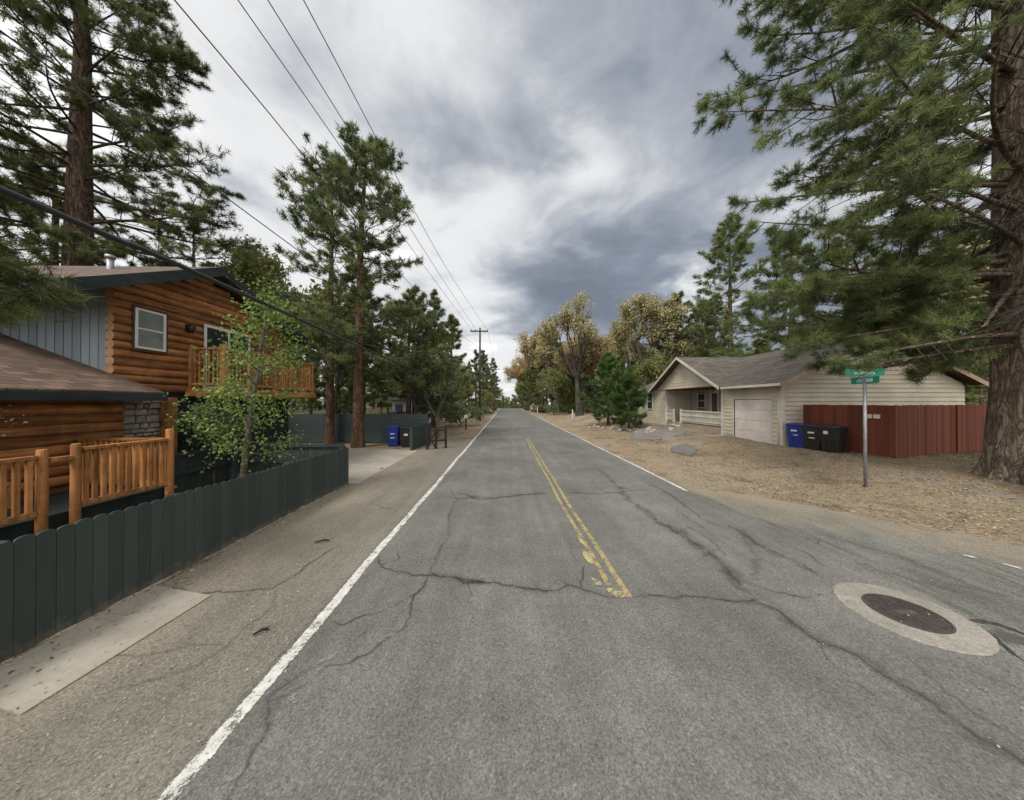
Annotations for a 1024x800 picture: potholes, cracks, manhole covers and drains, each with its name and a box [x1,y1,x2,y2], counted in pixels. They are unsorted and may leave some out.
manhole cover [832,582,1000,656]
crack [338,558,614,665]
crack [637,594,1024,763]
